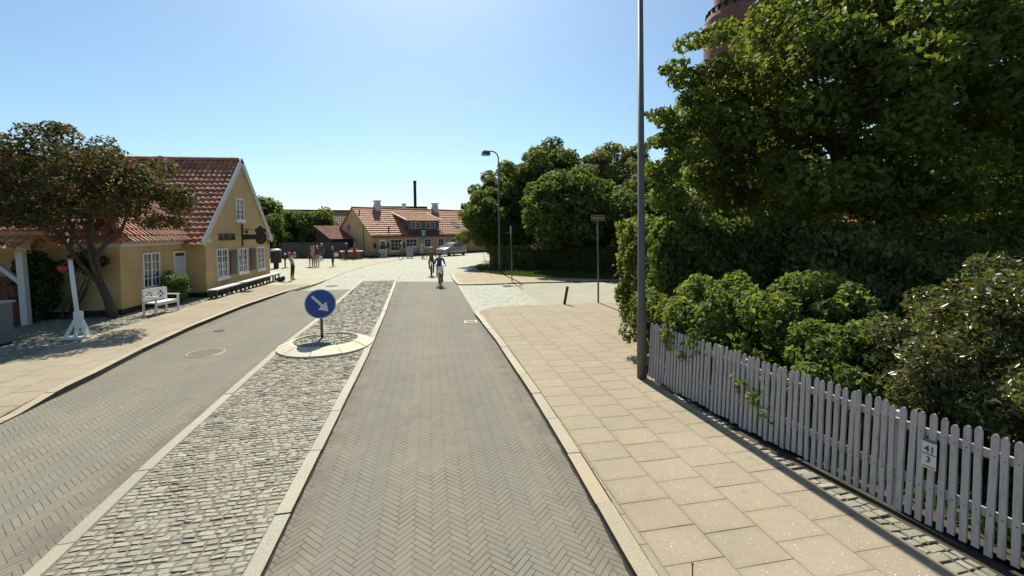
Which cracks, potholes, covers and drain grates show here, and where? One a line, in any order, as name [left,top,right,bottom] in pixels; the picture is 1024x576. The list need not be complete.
manhole cover [185,348,226,358]
